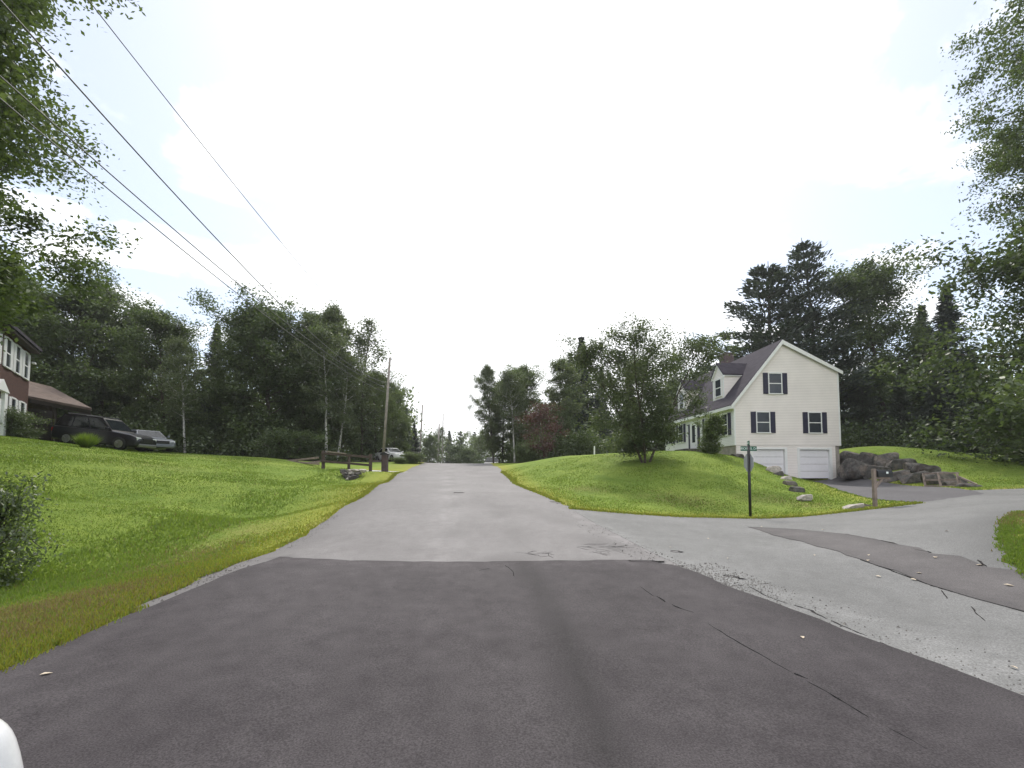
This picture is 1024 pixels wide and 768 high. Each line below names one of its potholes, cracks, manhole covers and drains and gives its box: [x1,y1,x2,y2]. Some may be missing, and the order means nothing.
crack [578,543,634,556]
crack [641,587,925,748]
crack [855,535,1024,621]
